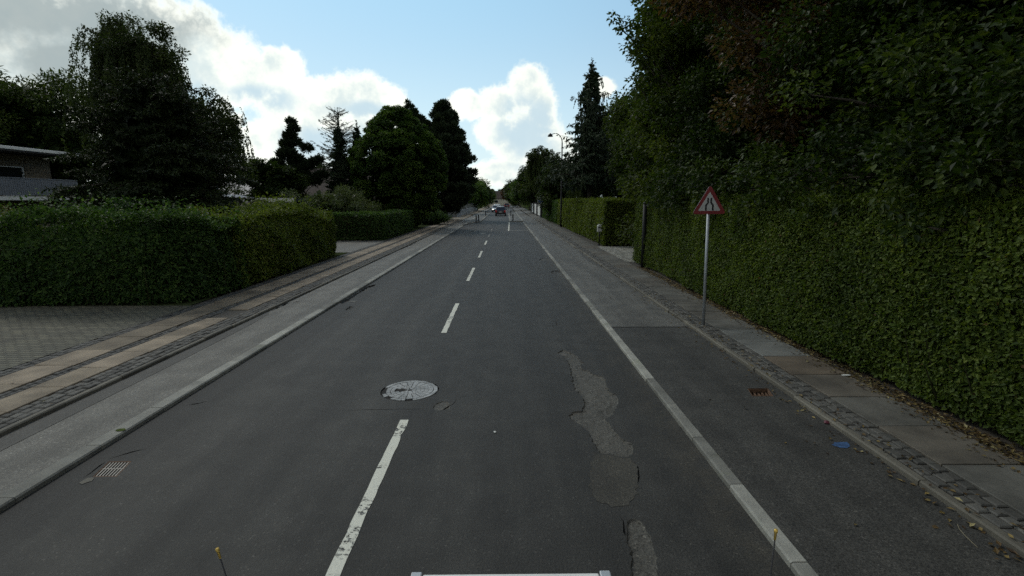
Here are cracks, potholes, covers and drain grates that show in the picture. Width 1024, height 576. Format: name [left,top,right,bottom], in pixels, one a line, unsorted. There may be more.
drain grate [747,388,773,396]
drain grate [93,461,131,477]
manhole cover [381,381,438,401]
